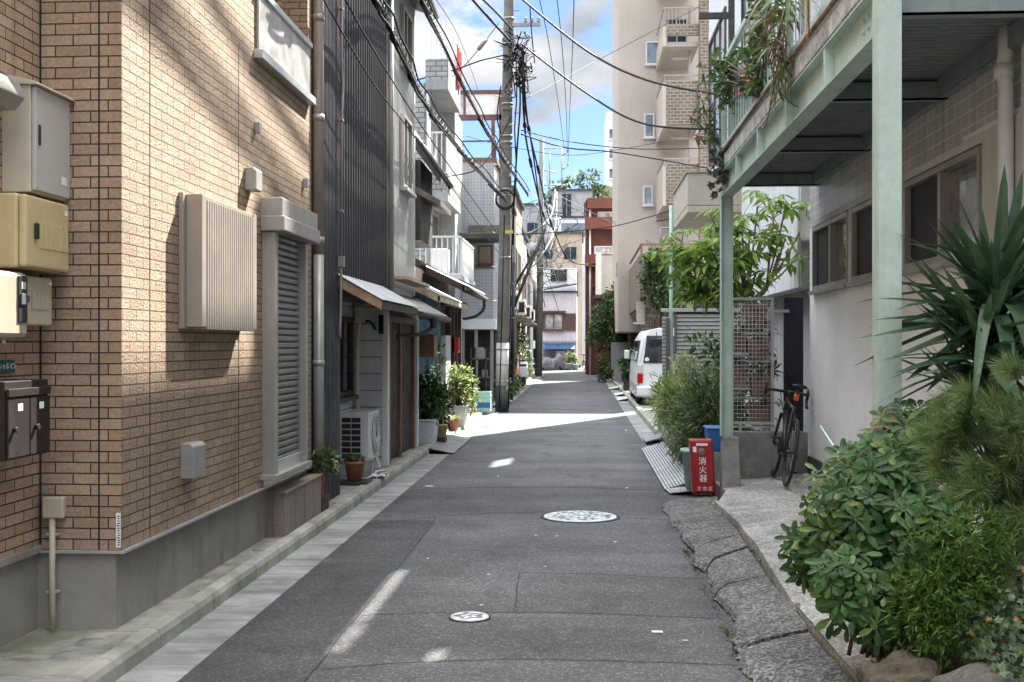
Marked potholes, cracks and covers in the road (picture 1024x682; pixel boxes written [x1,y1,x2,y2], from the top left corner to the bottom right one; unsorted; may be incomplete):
manhole cover [449,611,491,623]
manhole cover [75,638,106,646]
manhole cover [540,511,621,523]
